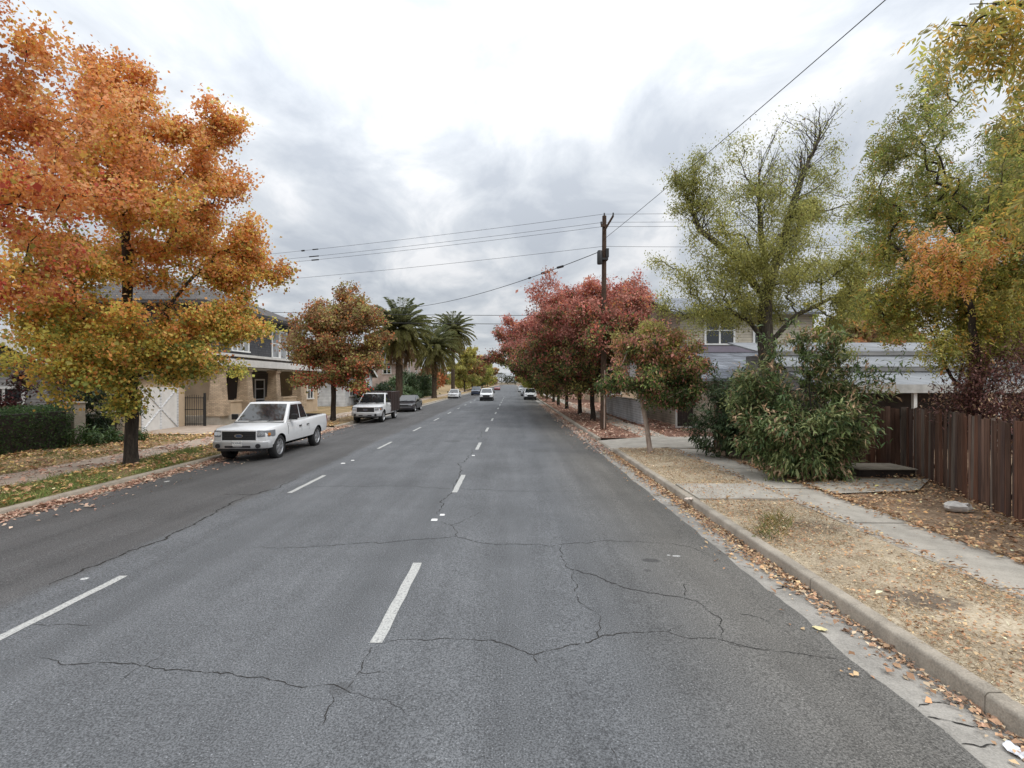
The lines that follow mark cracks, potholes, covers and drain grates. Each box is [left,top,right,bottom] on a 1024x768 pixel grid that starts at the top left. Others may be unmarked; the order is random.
crack [919,701,996,747]
crack [49,647,404,726]
crack [242,432,706,613]
crack [381,611,836,662]
